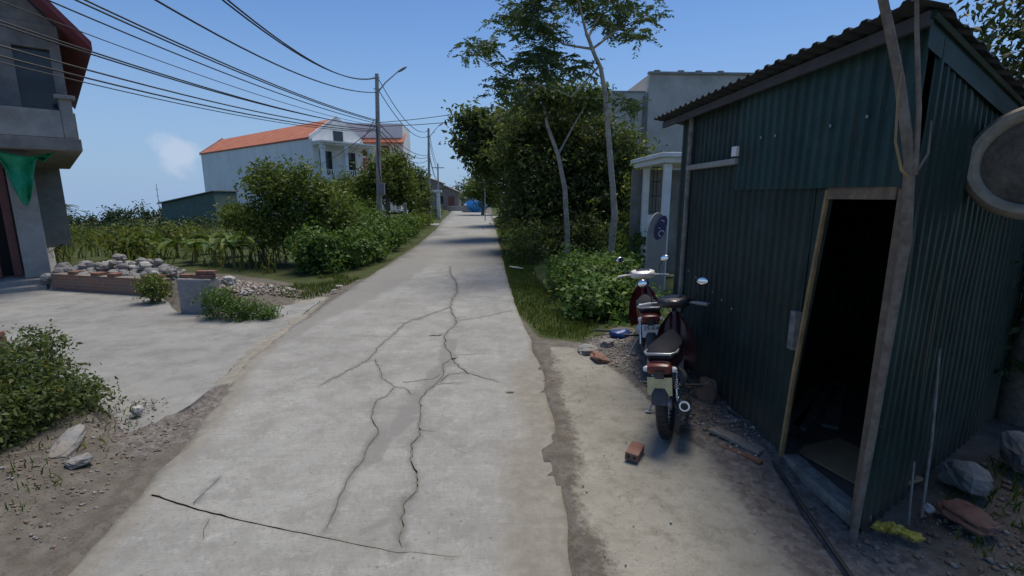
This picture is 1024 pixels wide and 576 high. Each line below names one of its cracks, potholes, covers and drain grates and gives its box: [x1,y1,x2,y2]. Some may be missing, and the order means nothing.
crack [324,268,508,547]
